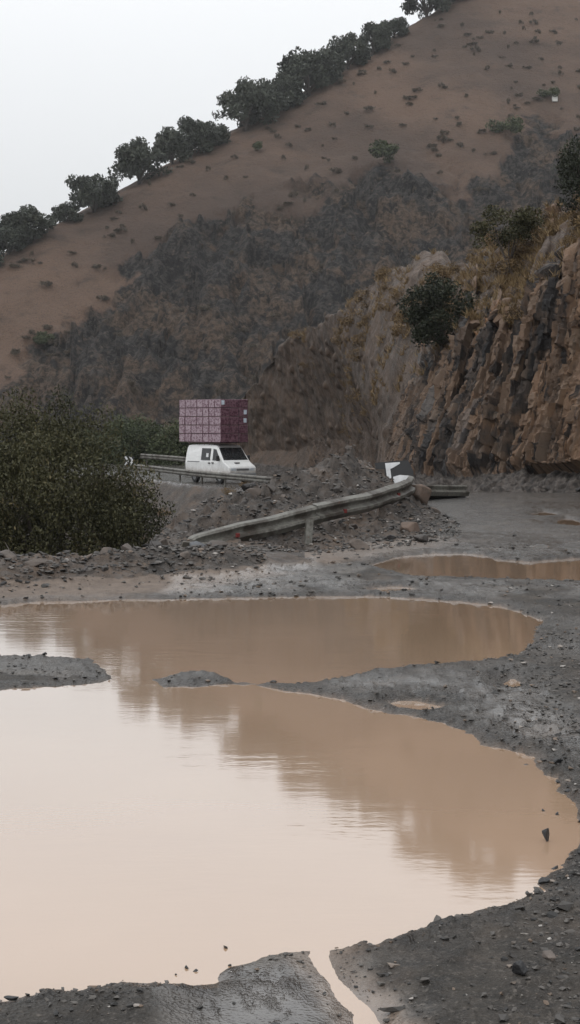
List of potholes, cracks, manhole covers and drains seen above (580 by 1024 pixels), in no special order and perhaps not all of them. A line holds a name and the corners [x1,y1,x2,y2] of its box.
pothole [552,516,580,525]
pothole [0,676,580,1006]
pothole [362,548,580,580]
pothole [0,589,555,685]
